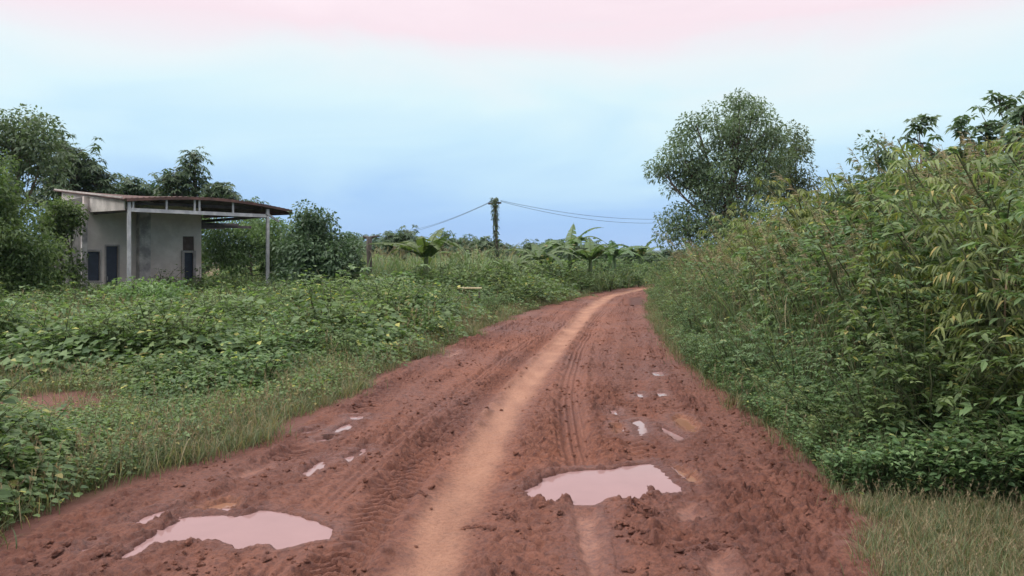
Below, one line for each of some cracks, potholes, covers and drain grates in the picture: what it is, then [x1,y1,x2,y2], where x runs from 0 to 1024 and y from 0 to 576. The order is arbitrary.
pothole [514,457,694,512]
pothole [106,502,345,563]
pothole [645,368,673,377]
